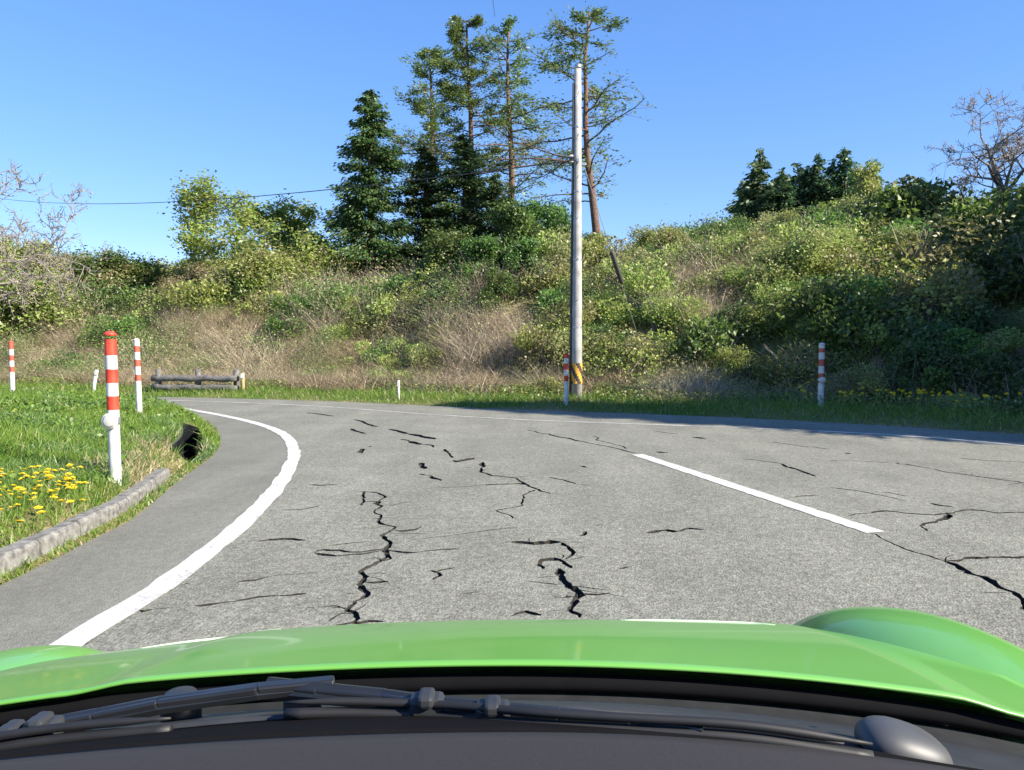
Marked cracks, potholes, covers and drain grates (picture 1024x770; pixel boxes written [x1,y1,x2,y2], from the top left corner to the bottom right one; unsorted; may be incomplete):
crack [182,419,629,625]
